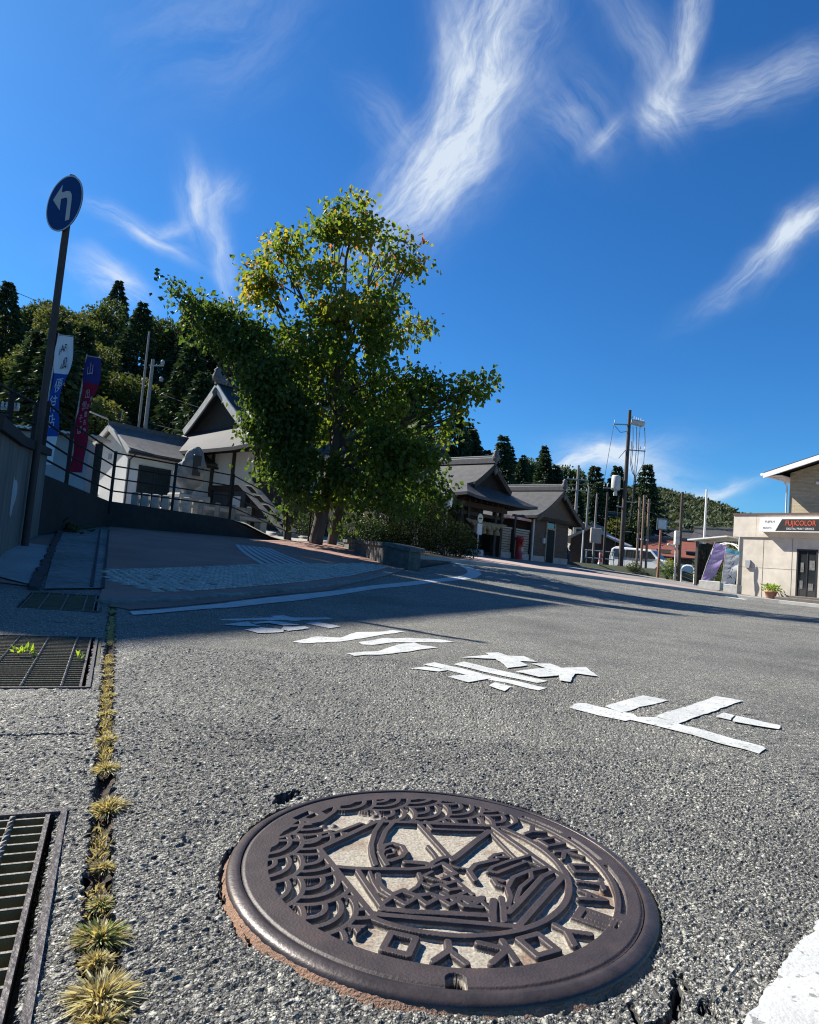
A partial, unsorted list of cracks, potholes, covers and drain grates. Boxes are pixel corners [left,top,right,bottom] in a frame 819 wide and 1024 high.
drain grate [0,807,68,1024]
pothole [273,790,301,805]
drain grate [19,592,103,613]
crack [630,975,715,1024]
manhole cover [218,790,677,1019]
drain grate [0,634,102,689]
